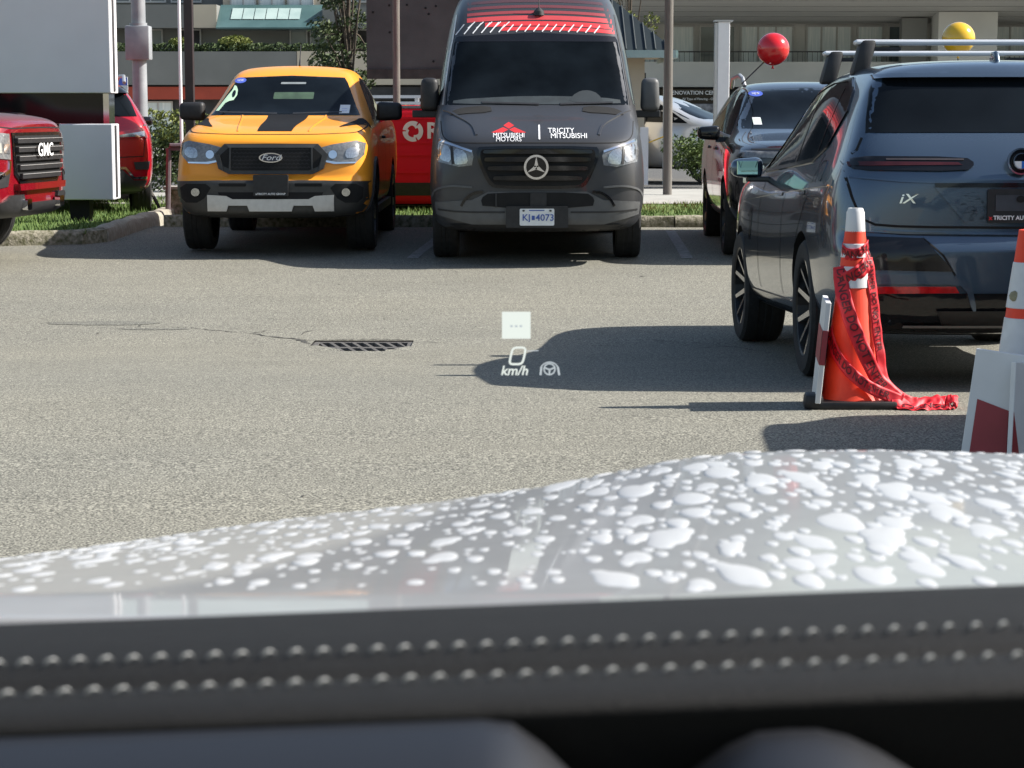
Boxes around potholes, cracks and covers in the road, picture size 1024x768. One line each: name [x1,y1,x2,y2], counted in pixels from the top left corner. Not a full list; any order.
drain grate [310,342,413,351]
crack [191,327,313,345]
